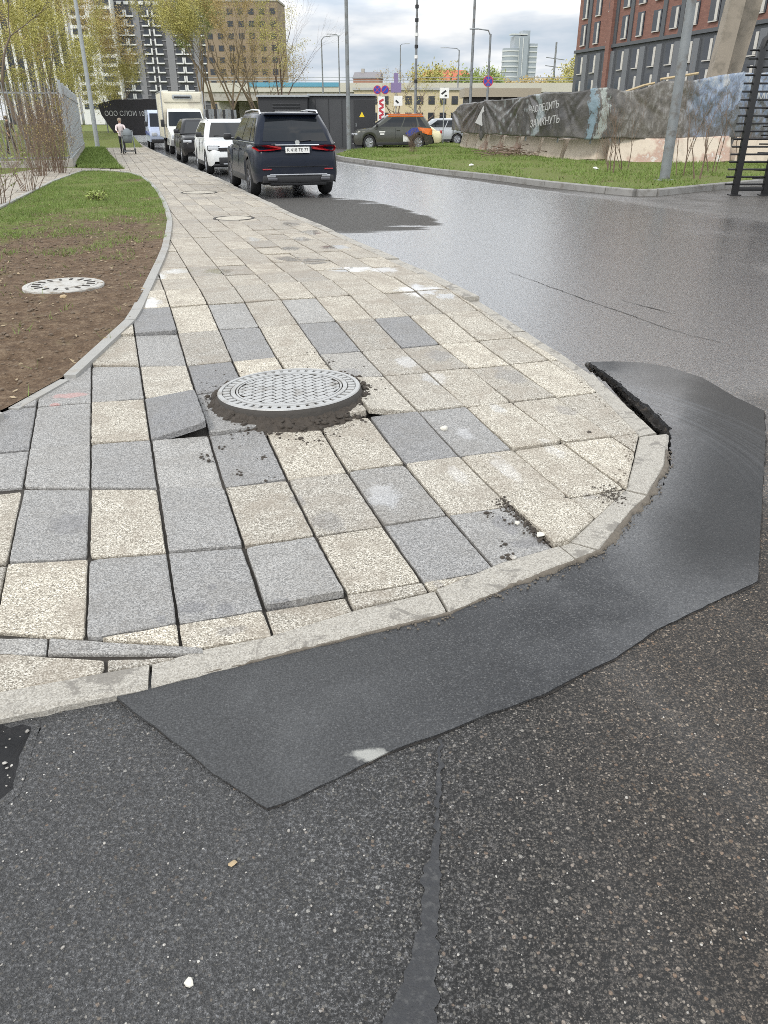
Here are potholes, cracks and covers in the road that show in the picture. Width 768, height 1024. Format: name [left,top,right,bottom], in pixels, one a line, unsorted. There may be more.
crack [516,274,719,342]
pothole [591,365,670,461]
manhole cover [22,277,105,294]
manhole cover [217,368,362,419]
